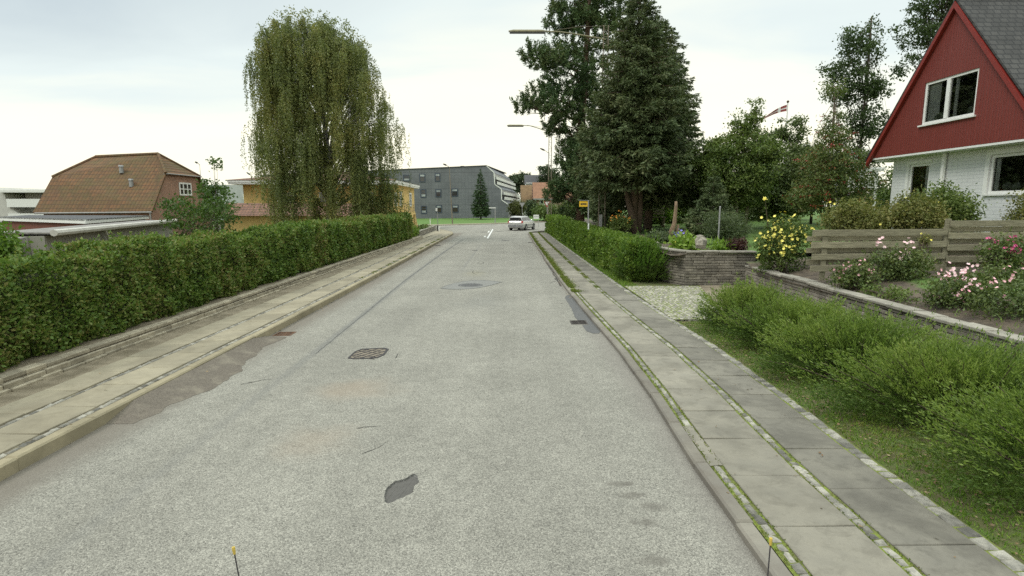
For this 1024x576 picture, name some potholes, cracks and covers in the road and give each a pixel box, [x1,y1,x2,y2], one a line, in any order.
manhole cover [348,348,389,359]
pothole [384,474,419,503]
